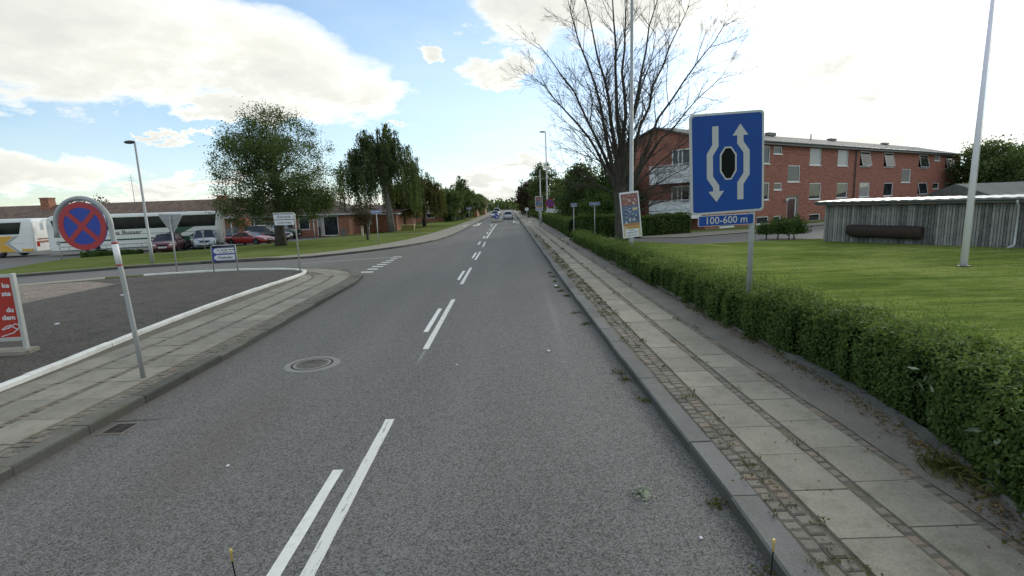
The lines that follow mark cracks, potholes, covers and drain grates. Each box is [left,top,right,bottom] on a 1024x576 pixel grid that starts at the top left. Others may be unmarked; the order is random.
manhole cover [283,356,340,373]
drain grate [97,422,141,435]
